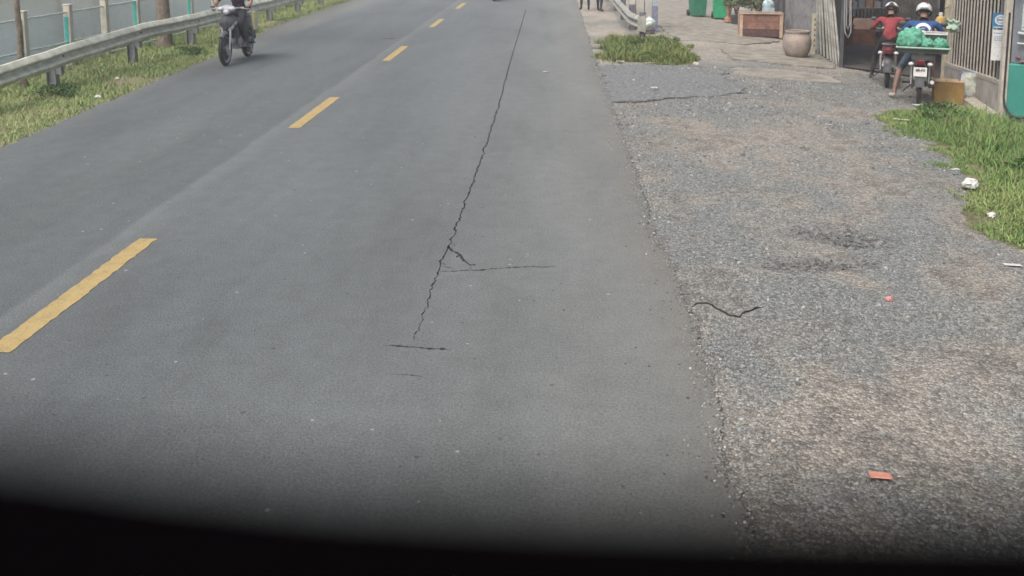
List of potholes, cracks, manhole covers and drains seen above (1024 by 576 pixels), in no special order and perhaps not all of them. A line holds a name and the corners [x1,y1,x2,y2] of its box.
crack [692,301,763,321]
crack [413,9,556,339]
pothole [762,257,878,273]
pothole [780,224,898,251]
